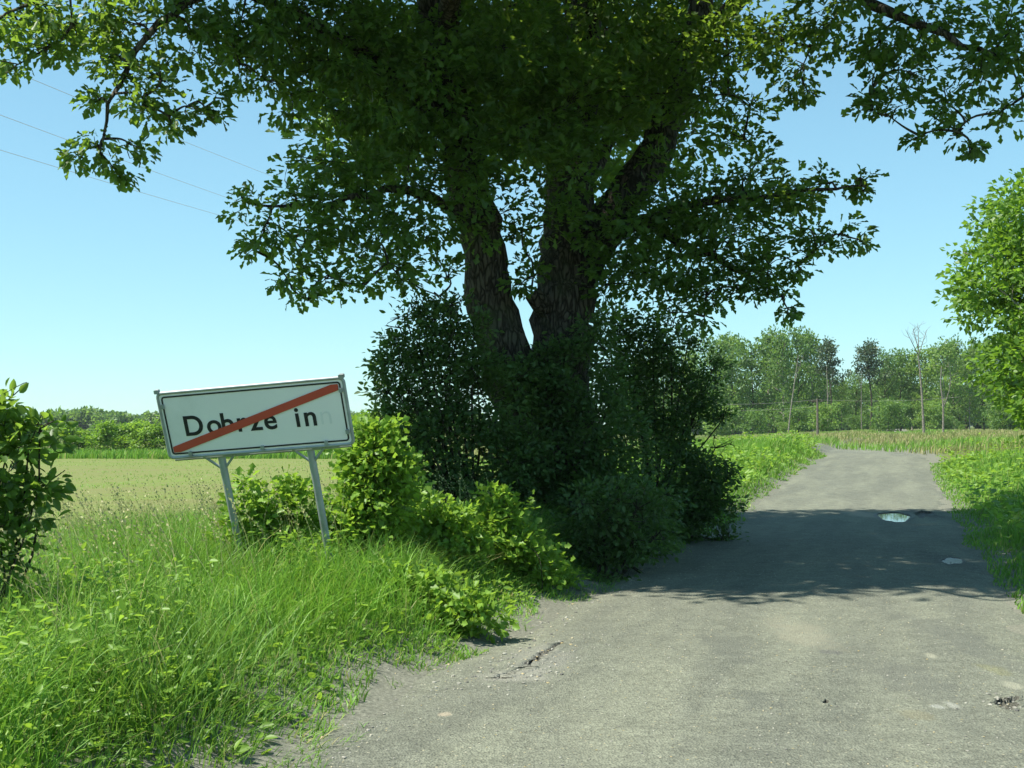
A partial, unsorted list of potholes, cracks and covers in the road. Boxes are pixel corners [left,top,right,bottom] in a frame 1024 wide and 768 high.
pothole [910,510,939,519]
crack [486,641,573,679]
pothole [873,511,916,523]
pothole [983,695,1024,713]
